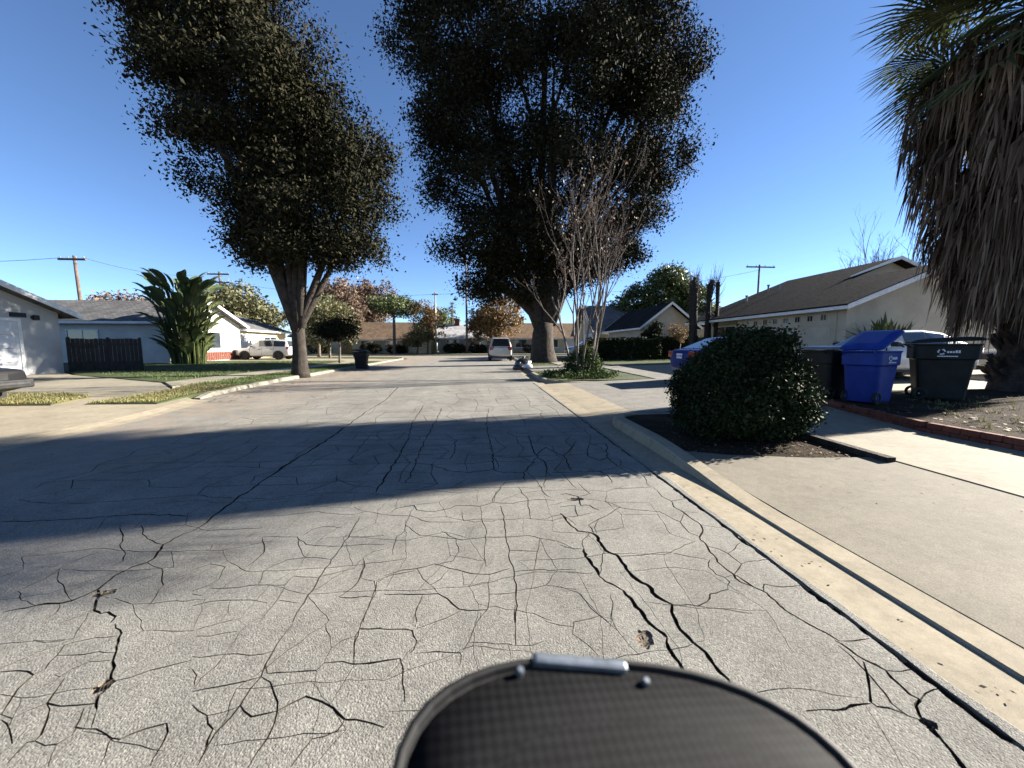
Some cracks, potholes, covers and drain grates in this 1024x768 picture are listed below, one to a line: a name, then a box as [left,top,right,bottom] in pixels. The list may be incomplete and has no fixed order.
crack [0,387,967,768]
pothole [635,630,654,650]
